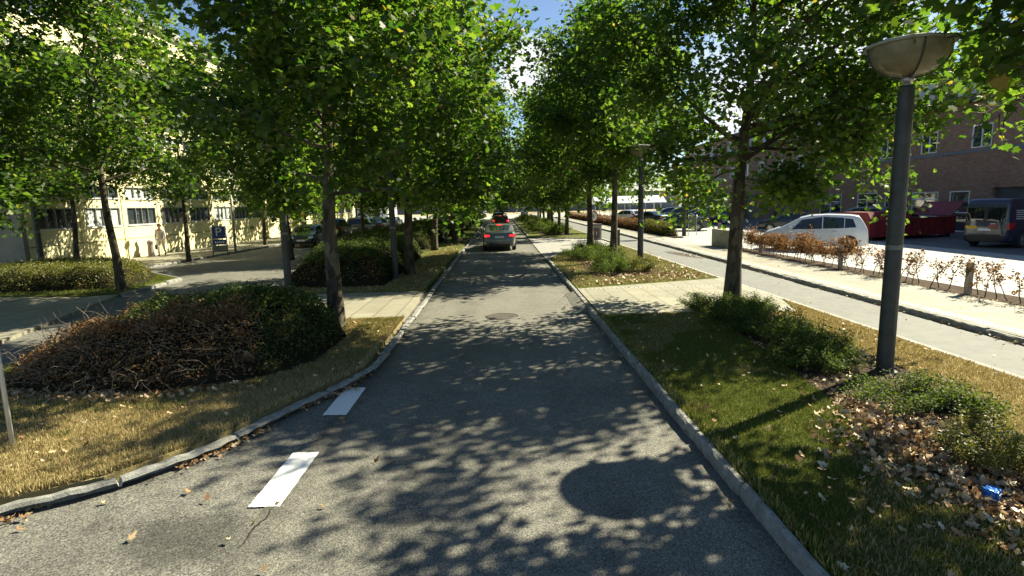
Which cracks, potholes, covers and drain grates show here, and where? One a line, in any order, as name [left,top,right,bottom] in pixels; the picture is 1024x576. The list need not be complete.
crack [237,510,270,548]
